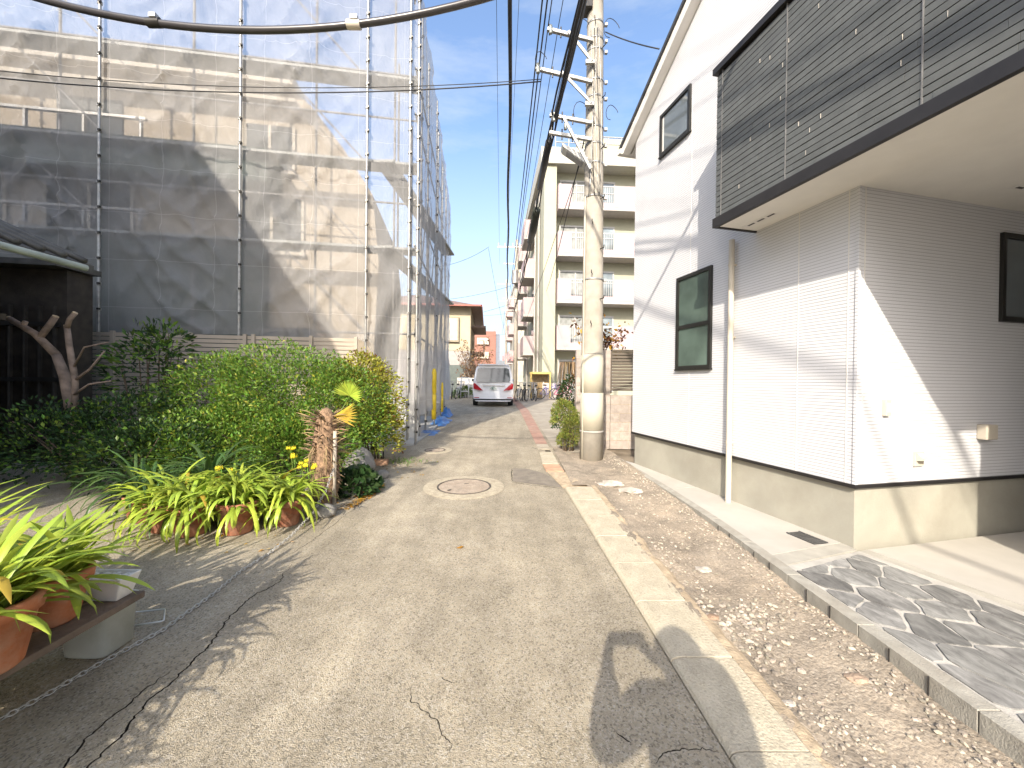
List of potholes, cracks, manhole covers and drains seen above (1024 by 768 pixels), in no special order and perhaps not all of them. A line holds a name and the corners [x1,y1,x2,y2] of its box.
manhole cover [423,476,504,499]
crack [63,490,381,768]
crack [410,678,453,756]
crack [656,747,719,763]
drain grate [786,531,828,545]
